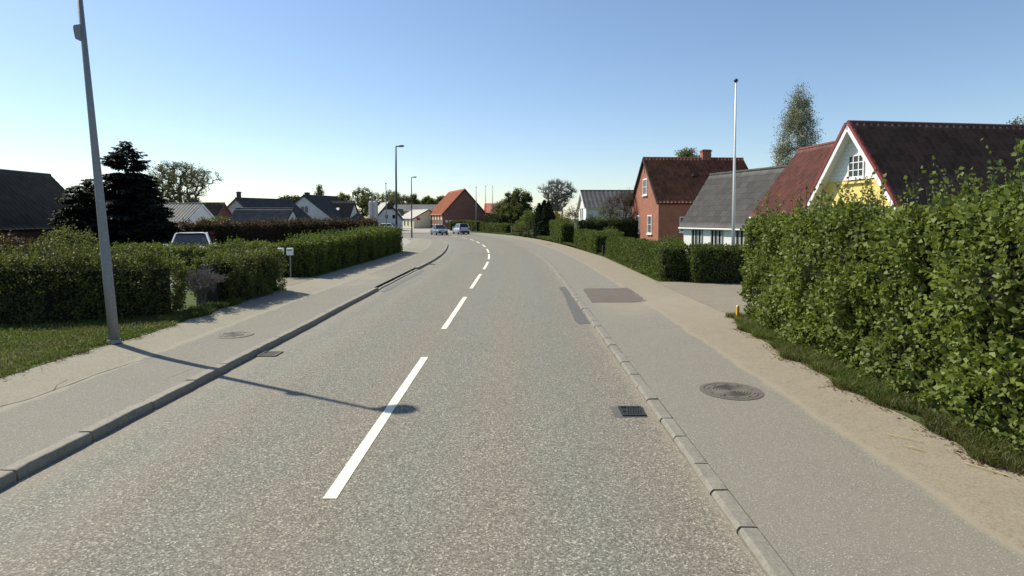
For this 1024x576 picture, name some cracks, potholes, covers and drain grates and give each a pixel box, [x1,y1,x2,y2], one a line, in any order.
drain grate [610,406,647,417]
manhole cover [214,331,254,339]
manhole cover [699,382,764,401]
